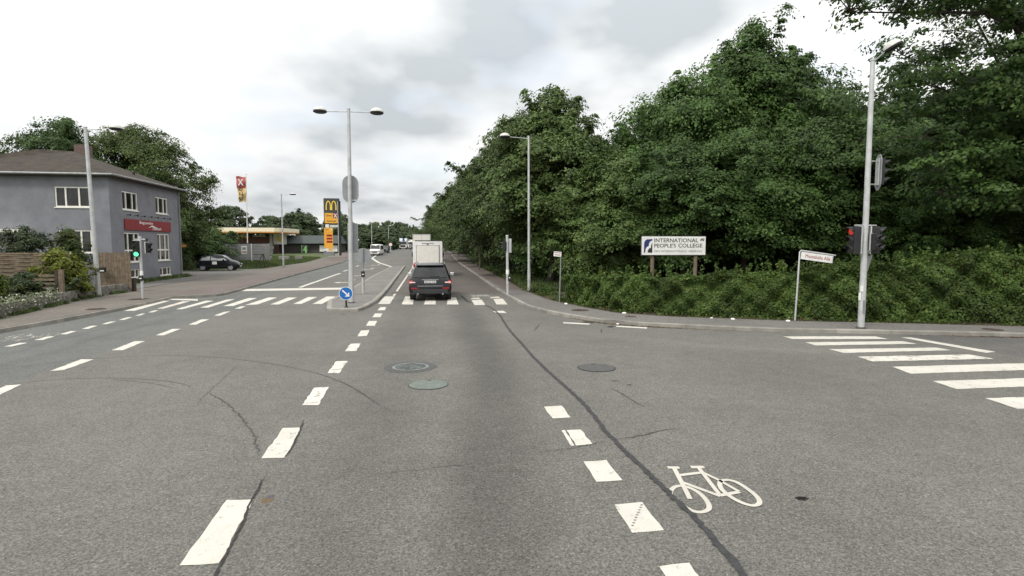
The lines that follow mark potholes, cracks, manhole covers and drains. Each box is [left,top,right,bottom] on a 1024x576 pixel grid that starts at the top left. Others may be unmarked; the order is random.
crack [199,367,260,453]
crack [541,428,680,452]
manhole cover [577,364,616,372]
manhole cover [384,362,437,373]
crack [214,422,303,576]
manhole cover [408,380,448,390]
